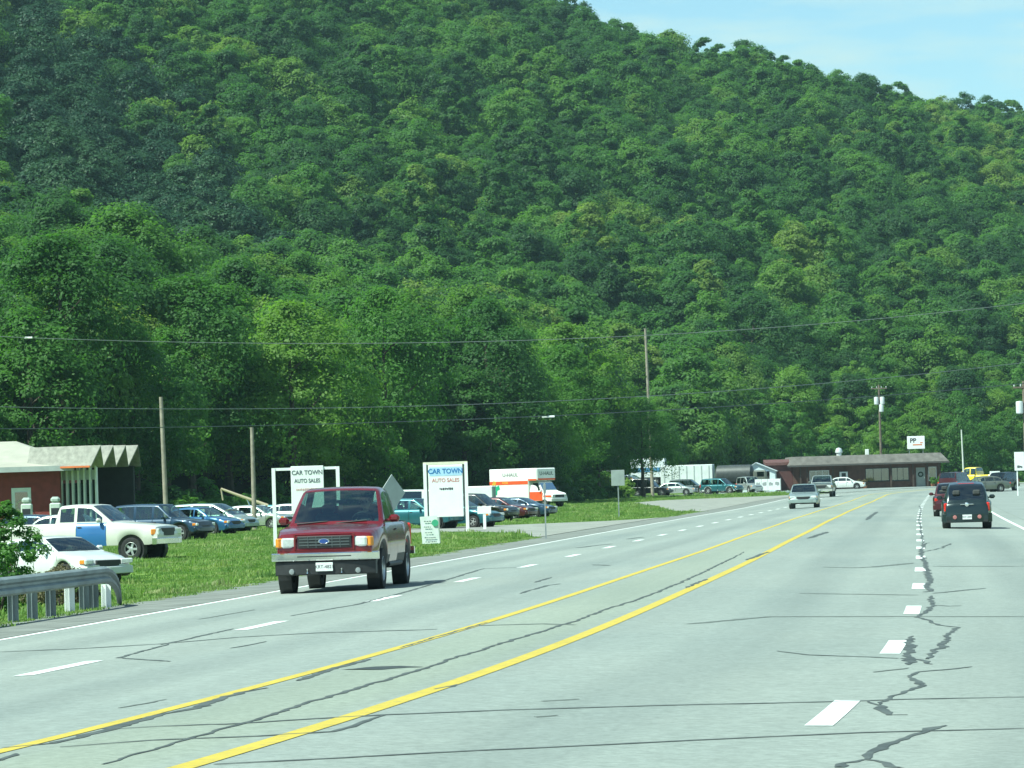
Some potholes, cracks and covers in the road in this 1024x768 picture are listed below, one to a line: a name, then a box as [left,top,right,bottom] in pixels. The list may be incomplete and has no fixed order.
crack [780,651,907,672]
